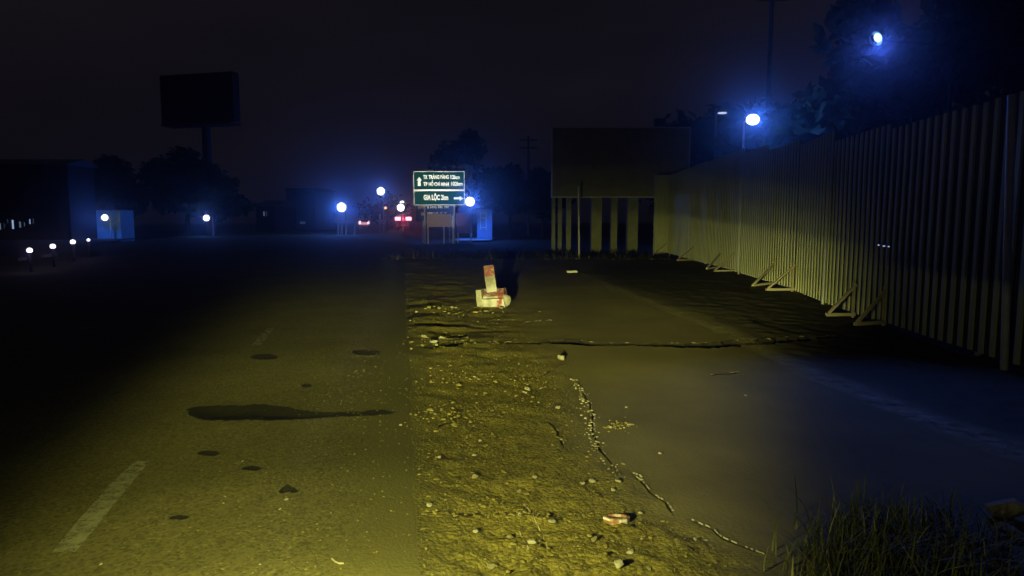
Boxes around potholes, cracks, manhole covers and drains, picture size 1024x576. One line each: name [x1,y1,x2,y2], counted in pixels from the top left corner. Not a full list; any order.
crack [408,311,841,555]
pothole [278,484,299,493]
pothole [187,404,396,421]
